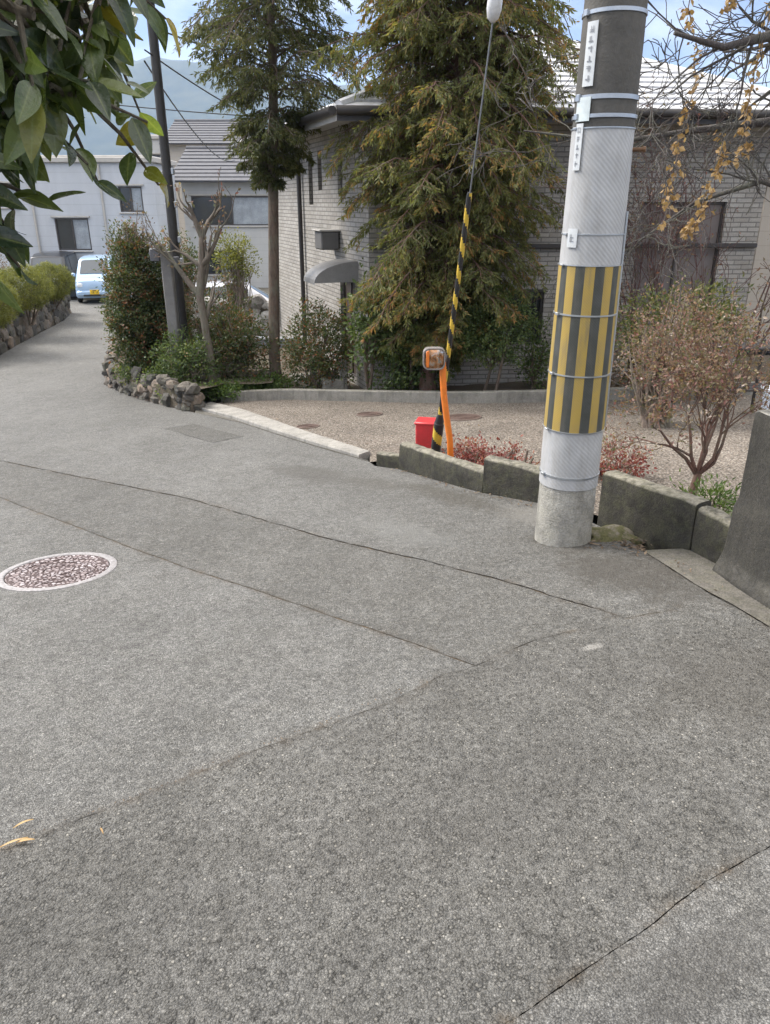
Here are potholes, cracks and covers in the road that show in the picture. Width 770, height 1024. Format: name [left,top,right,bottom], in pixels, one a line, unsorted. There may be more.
manhole cover [443,413,482,421]
manhole cover [0,552,117,592]
